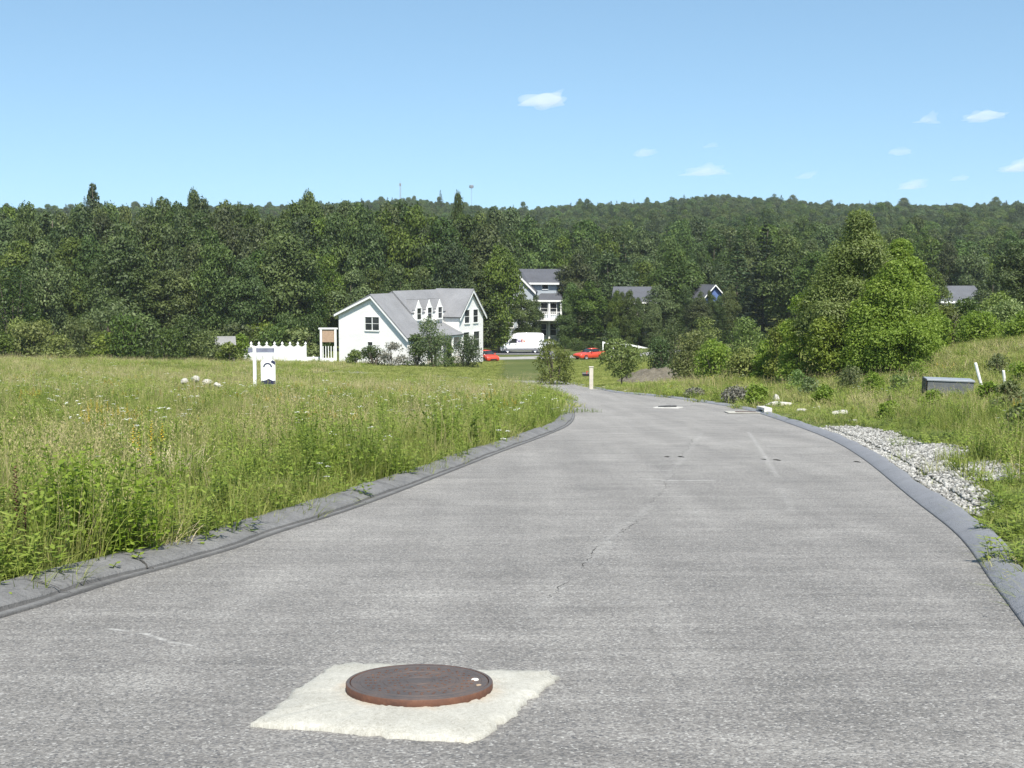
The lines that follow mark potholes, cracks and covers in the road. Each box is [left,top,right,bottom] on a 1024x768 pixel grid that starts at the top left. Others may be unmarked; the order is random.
manhole cover [346,664,493,707]
